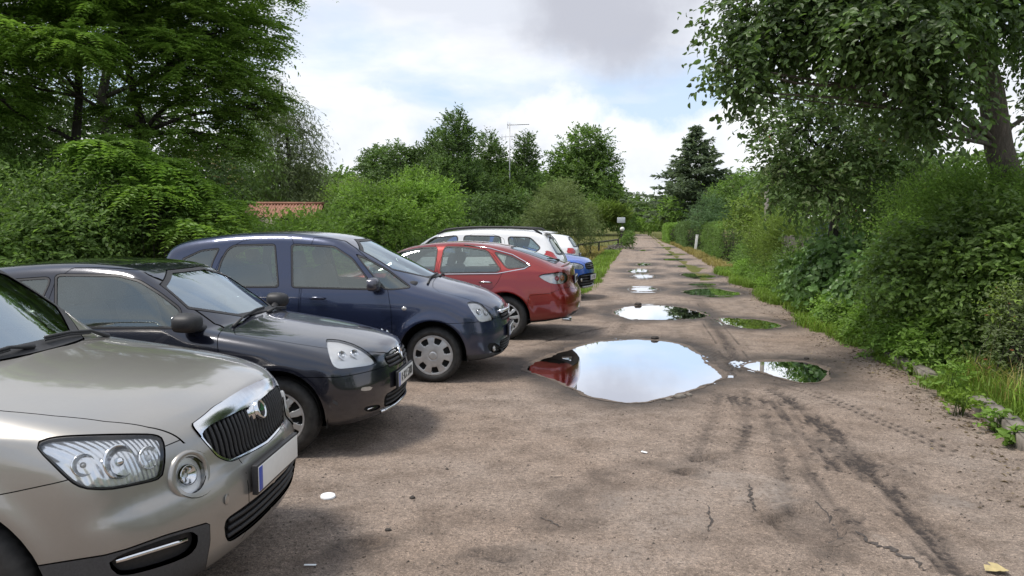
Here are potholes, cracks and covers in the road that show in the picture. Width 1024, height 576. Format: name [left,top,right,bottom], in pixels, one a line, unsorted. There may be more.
pothole [729,359,831,384]
pothole [521,338,733,404]
crack [814,500,931,570]
pothole [710,317,787,330]
crack [747,482,757,511]
pothole [611,304,719,320]
pothole [681,287,742,297]
